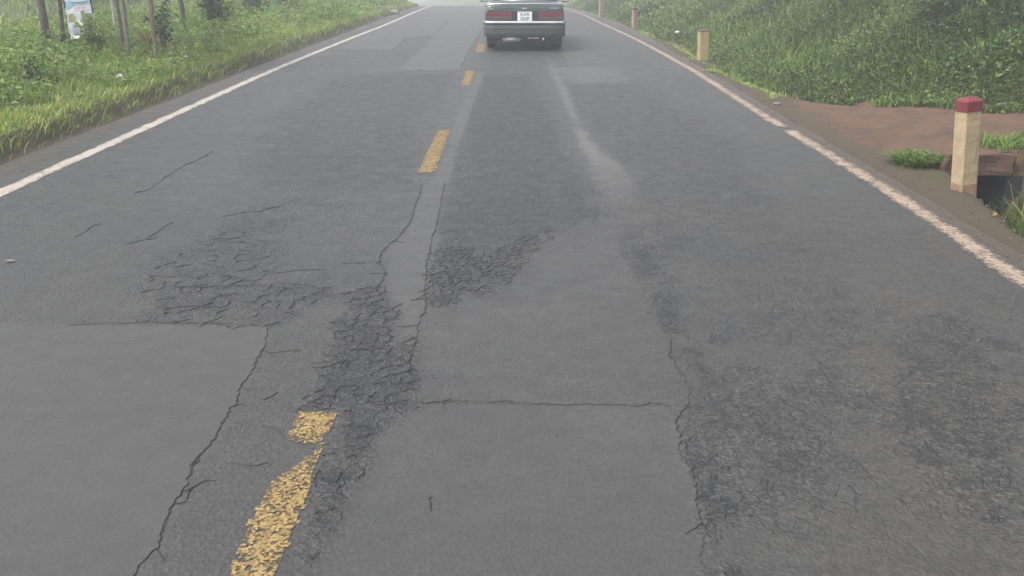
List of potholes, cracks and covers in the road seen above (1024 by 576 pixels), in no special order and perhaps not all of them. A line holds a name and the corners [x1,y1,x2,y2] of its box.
crack [661,328,718,563]
crack [76,182,554,576]
